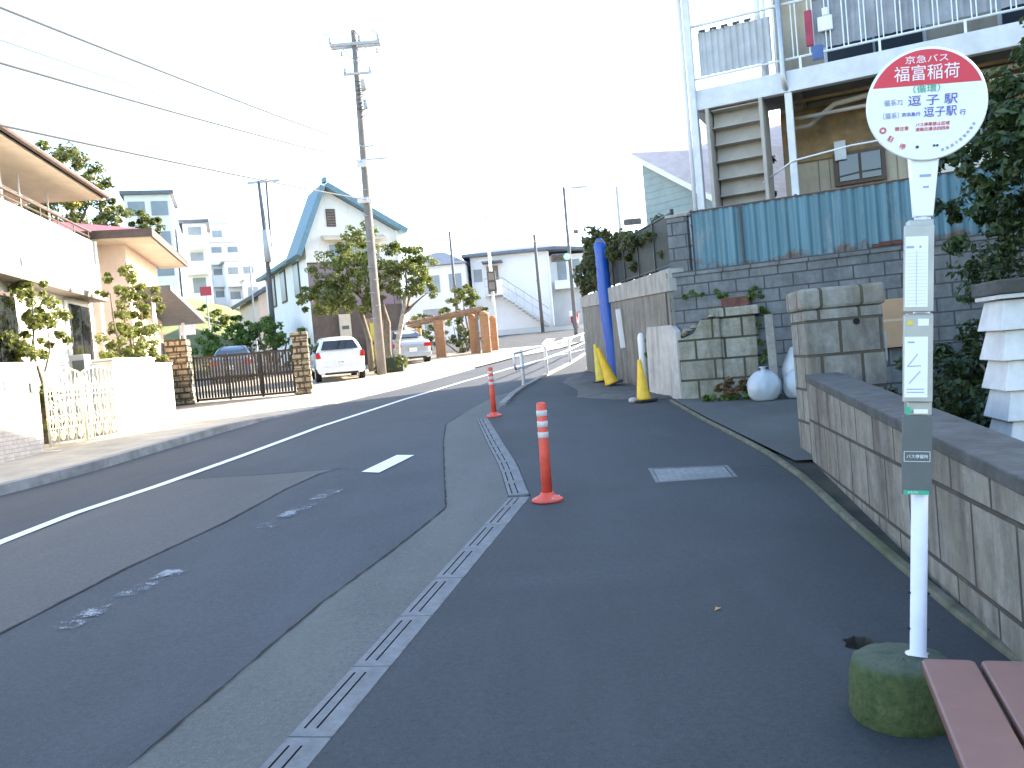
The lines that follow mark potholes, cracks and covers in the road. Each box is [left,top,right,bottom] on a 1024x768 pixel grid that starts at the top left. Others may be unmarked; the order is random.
manhole cover [648,465,738,483]
pothole [842,636,876,650]
